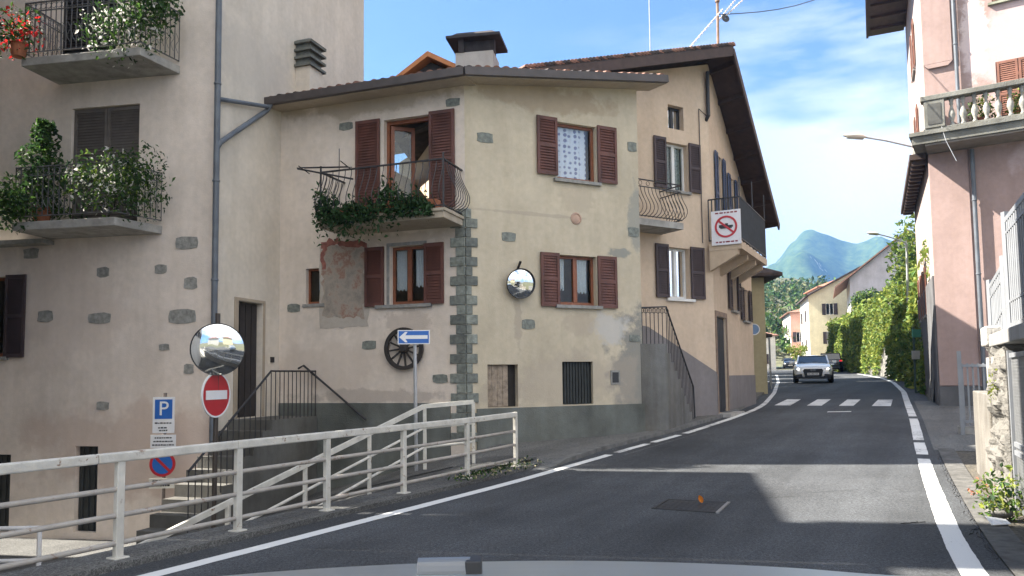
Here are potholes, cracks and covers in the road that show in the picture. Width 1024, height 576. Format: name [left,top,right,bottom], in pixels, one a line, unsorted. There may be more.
manhole cover [651,499,731,513]
